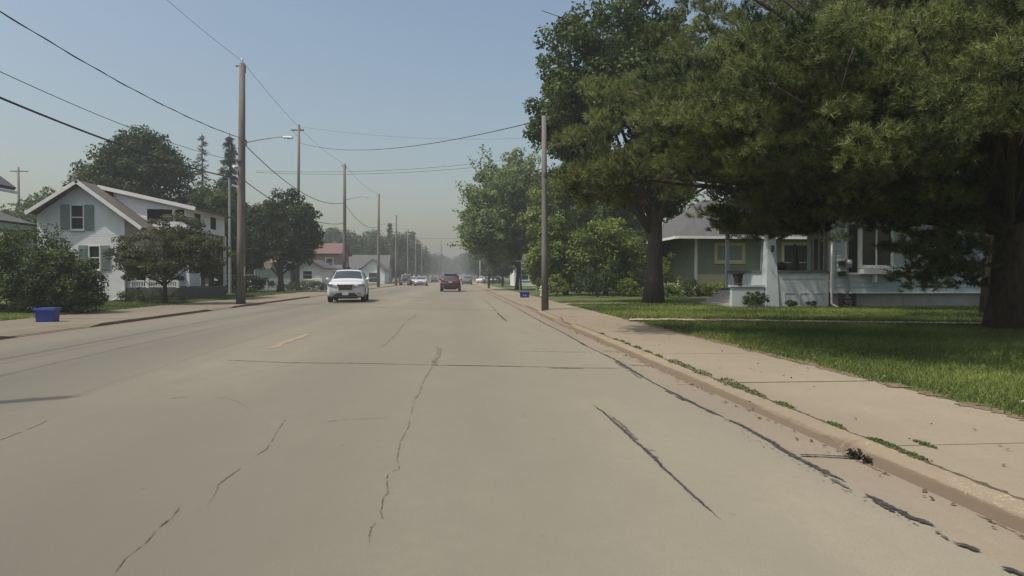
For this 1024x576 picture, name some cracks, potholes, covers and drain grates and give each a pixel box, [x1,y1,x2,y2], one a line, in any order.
crack [114,420,285,573]
crack [311,345,441,555]
